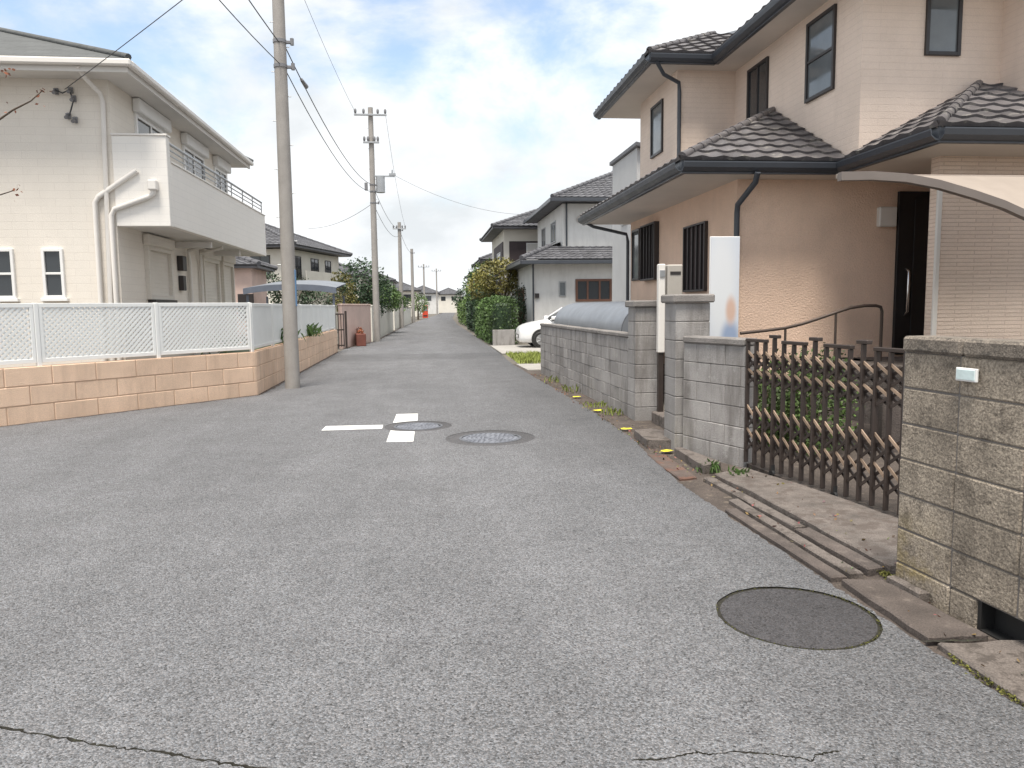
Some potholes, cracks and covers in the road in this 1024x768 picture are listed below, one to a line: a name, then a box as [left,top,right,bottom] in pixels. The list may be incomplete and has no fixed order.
manhole cover [446,431,535,446]
crack [631,750,841,762]
manhole cover [384,421,452,431]
crack [0,726,268,768]
